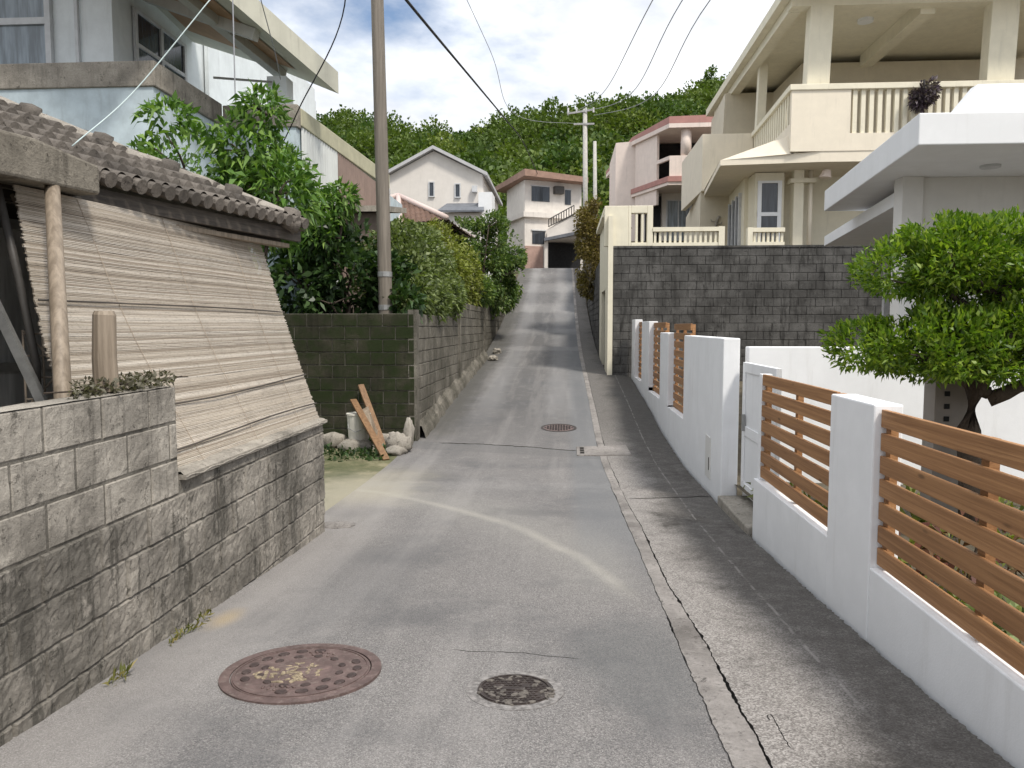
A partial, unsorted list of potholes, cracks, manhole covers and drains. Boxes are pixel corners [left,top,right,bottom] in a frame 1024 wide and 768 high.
manhole cover [218,643,382,705]
crack [453,649,577,659]
manhole cover [541,424,577,432]
manhole cover [466,671,564,711]
